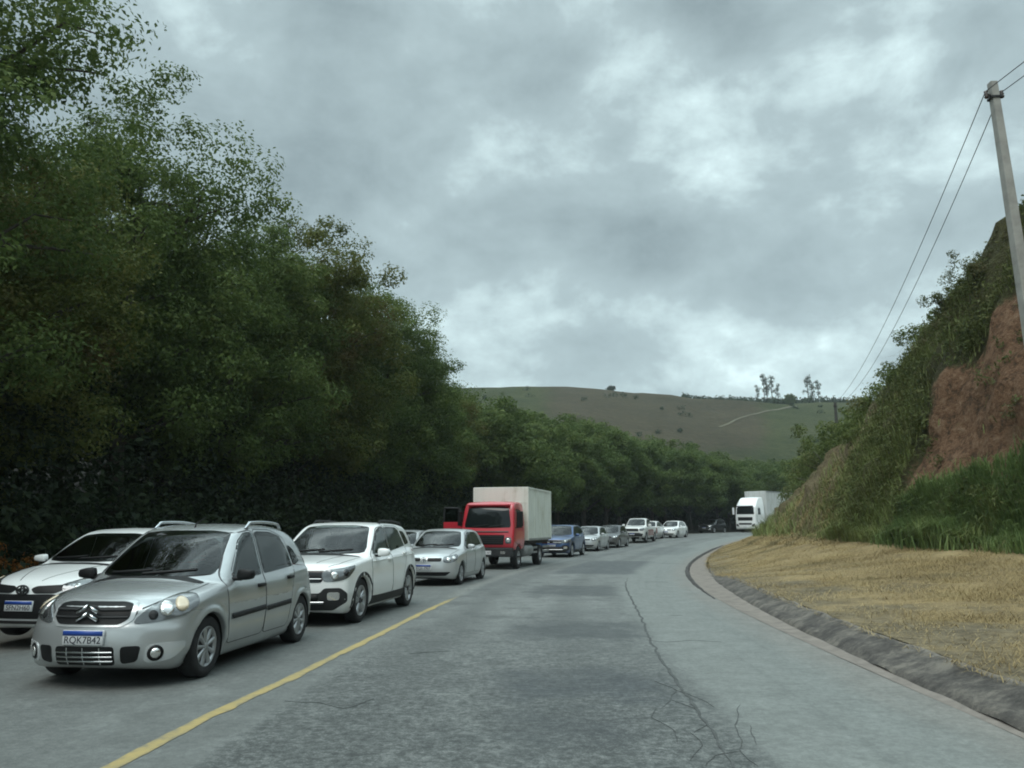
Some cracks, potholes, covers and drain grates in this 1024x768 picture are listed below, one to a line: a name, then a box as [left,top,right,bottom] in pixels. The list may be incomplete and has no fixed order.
crack [651,681,758,766]
